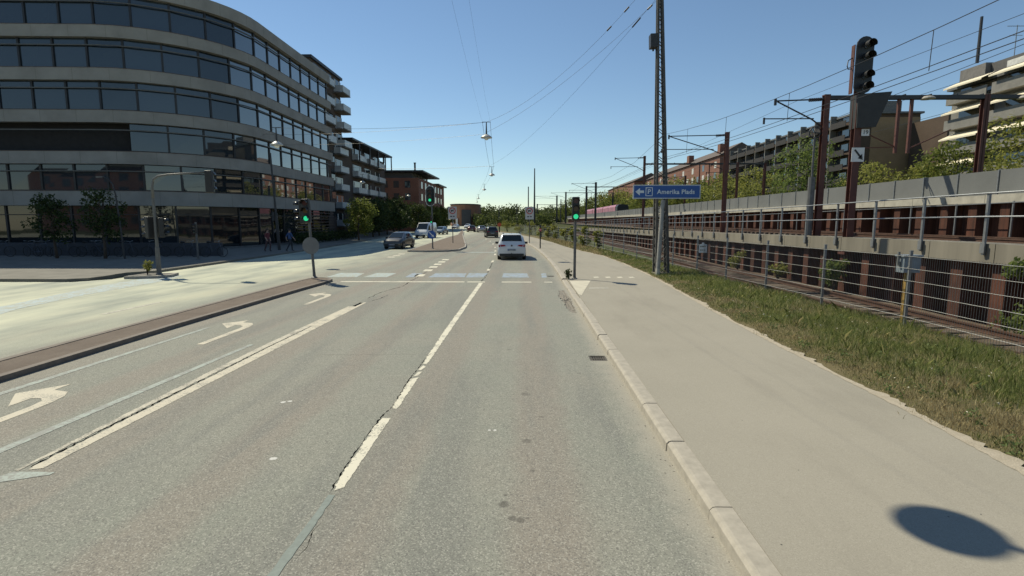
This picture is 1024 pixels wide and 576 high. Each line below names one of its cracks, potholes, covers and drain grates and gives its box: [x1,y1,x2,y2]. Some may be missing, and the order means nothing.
crack [330,360,425,492]
